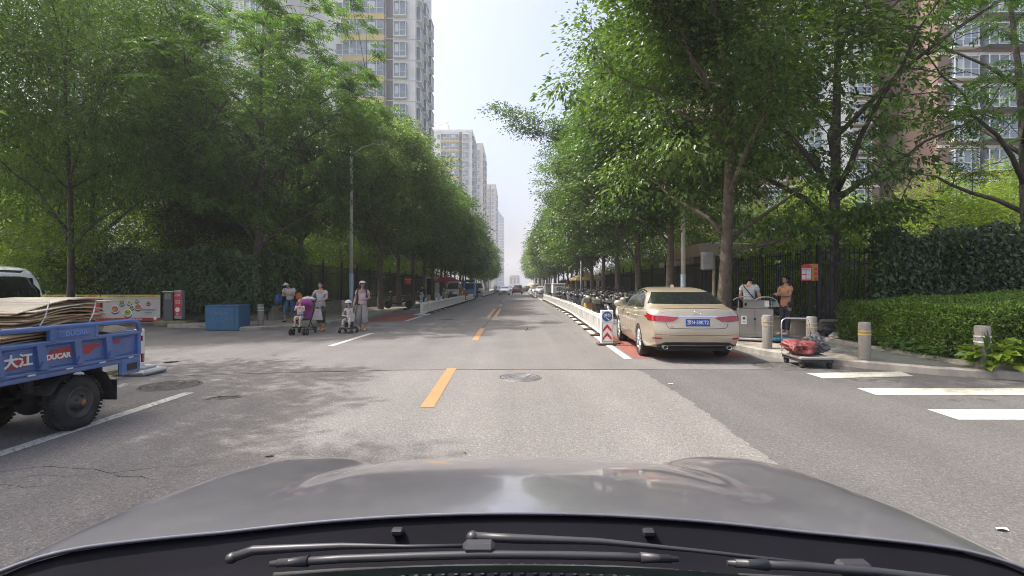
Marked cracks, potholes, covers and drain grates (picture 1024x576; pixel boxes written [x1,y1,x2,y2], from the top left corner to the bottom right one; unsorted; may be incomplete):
manhole cover [498,373,542,382]
manhole cover [135,380,203,391]
crack [0,465,196,488]
